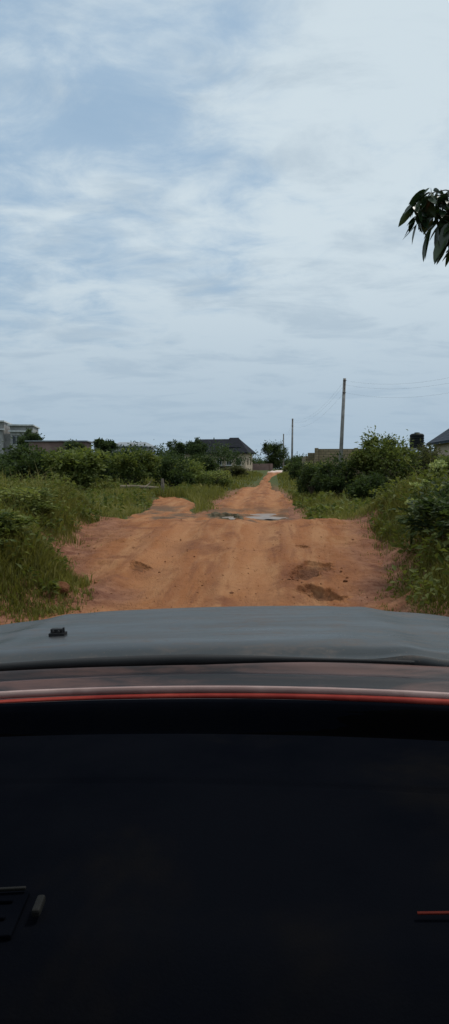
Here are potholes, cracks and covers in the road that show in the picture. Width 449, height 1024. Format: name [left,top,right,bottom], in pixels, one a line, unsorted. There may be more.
pothole [290,583,353,604]
pothole [126,559,155,574]
pothole [284,559,337,583]
pothole [206,512,244,520]
